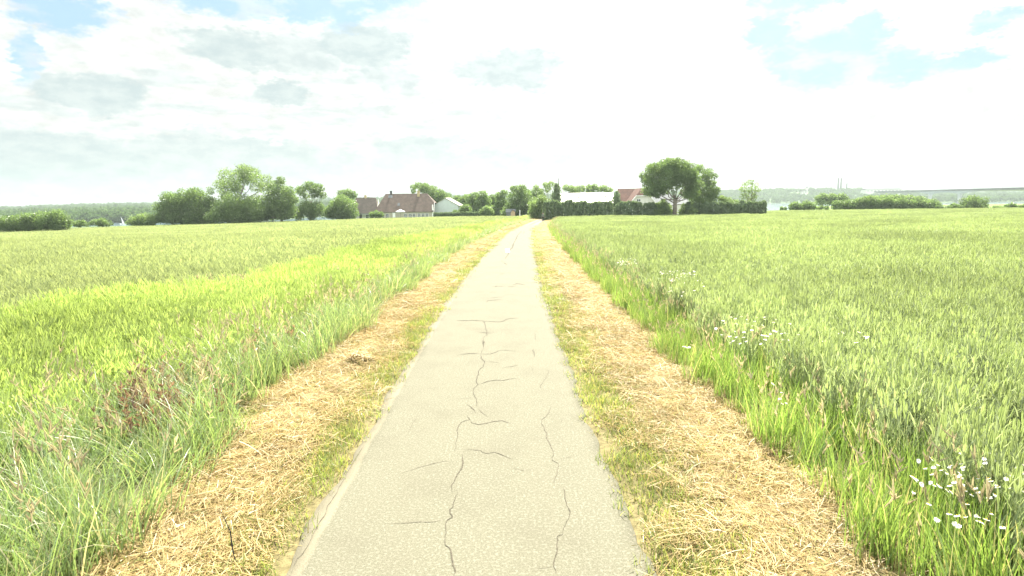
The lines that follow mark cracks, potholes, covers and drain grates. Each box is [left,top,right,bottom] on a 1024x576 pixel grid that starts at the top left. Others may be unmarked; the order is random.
crack [381,318,517,574]
crack [519,408,572,570]
